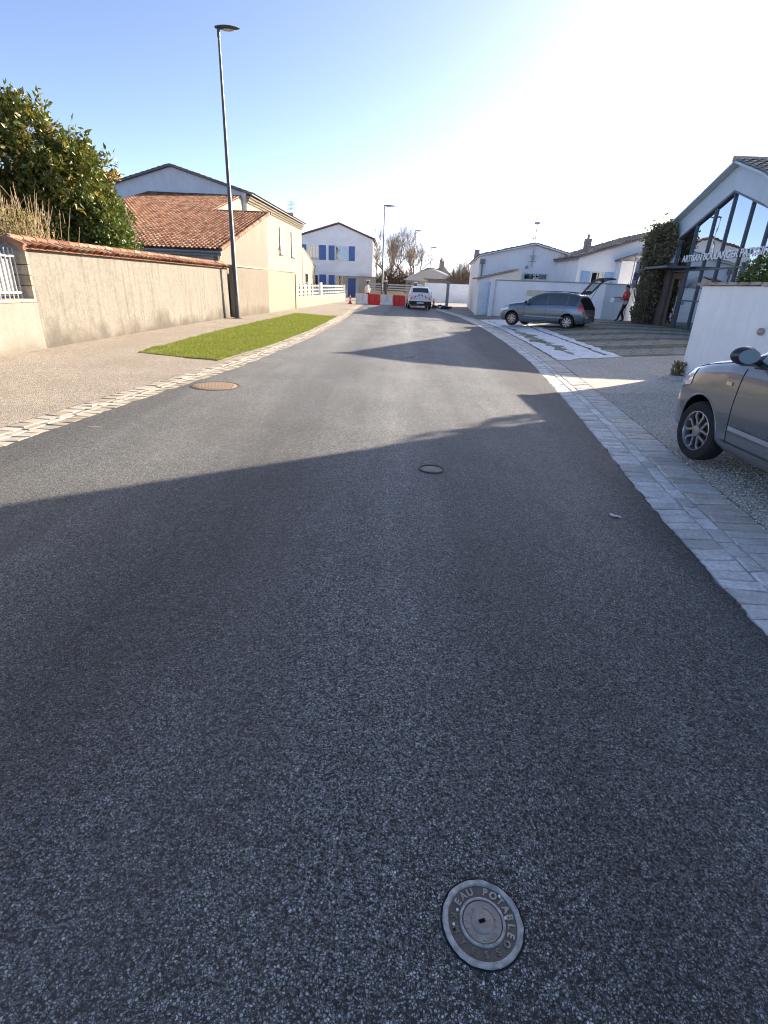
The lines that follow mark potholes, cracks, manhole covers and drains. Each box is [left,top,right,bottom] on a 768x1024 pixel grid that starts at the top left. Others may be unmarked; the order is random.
manhole cover [440,878,525,973]
manhole cover [418,464,445,474]
manhole cover [190,381,242,391]
